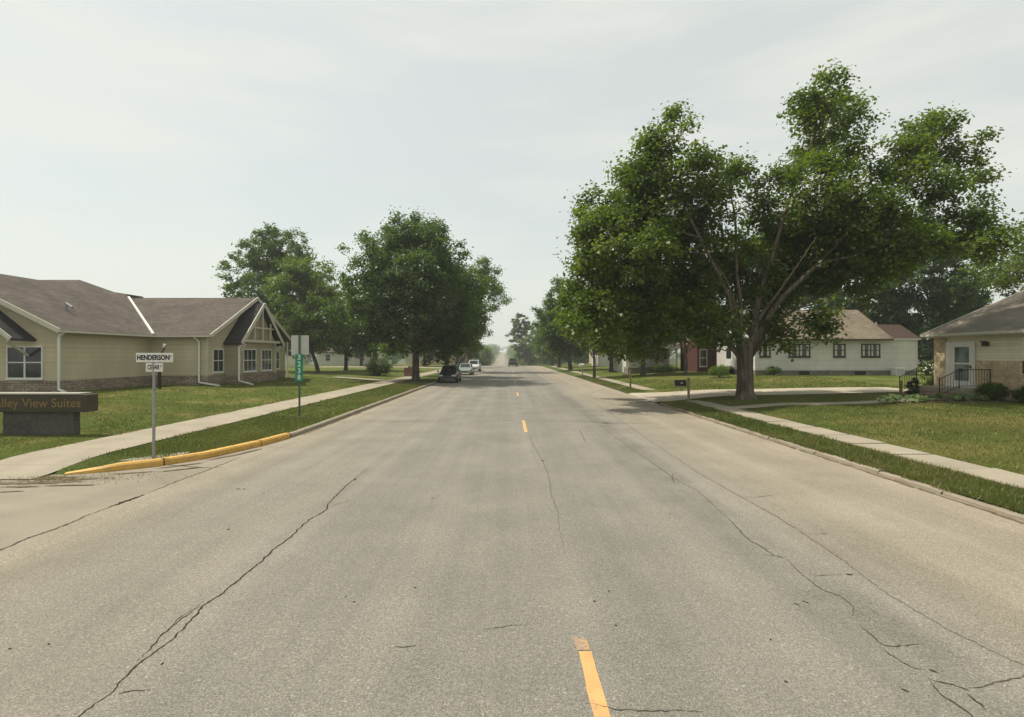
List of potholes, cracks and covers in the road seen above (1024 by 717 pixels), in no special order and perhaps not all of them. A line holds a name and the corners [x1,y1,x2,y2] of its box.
crack [560,395,1024,717]
crack [77,472,363,717]
